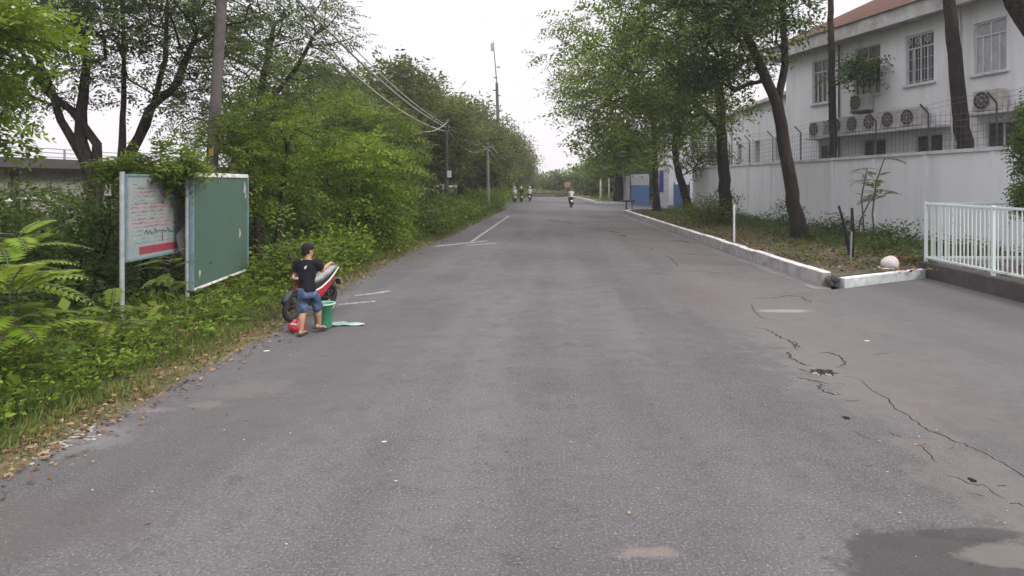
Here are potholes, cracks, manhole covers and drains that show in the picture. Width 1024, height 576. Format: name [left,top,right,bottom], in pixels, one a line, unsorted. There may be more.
crack [751,295,1024,507]
